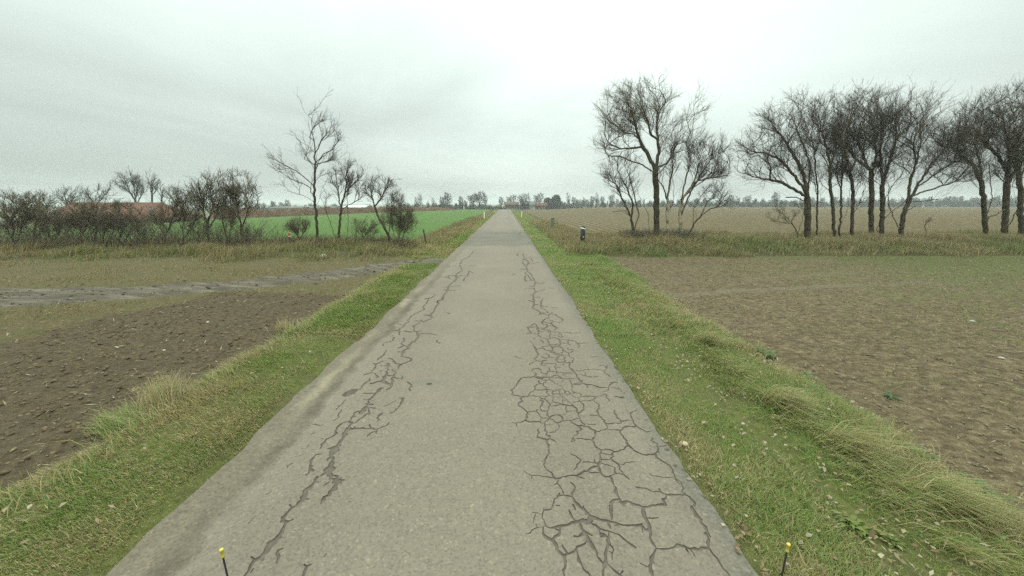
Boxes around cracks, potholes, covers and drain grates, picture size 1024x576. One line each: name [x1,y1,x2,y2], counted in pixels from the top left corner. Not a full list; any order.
crack [511,253,730,576]
crack [244,252,477,576]
